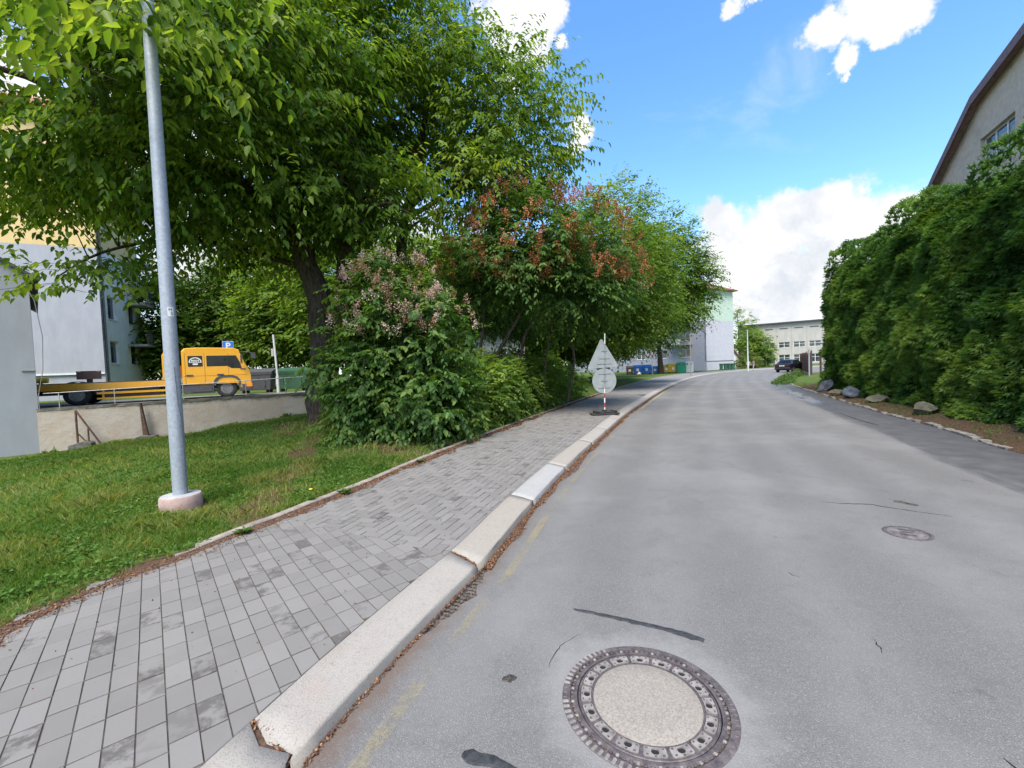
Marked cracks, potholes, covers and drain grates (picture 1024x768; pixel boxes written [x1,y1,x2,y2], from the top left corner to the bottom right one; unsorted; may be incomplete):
crack [821,501,947,516]
manhole cover [882,526,935,541]
manhole cover [562,646,741,768]
